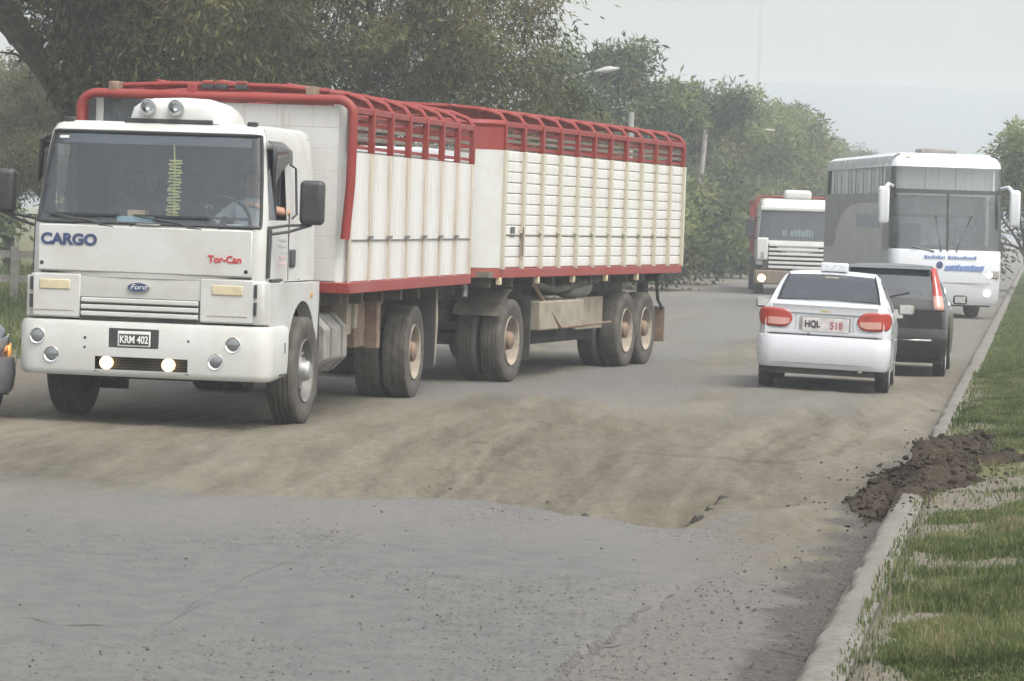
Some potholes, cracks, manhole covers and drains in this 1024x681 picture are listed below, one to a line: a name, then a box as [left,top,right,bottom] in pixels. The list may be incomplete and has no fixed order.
crack [171,532,363,621]
pothole [0,430,812,531]
